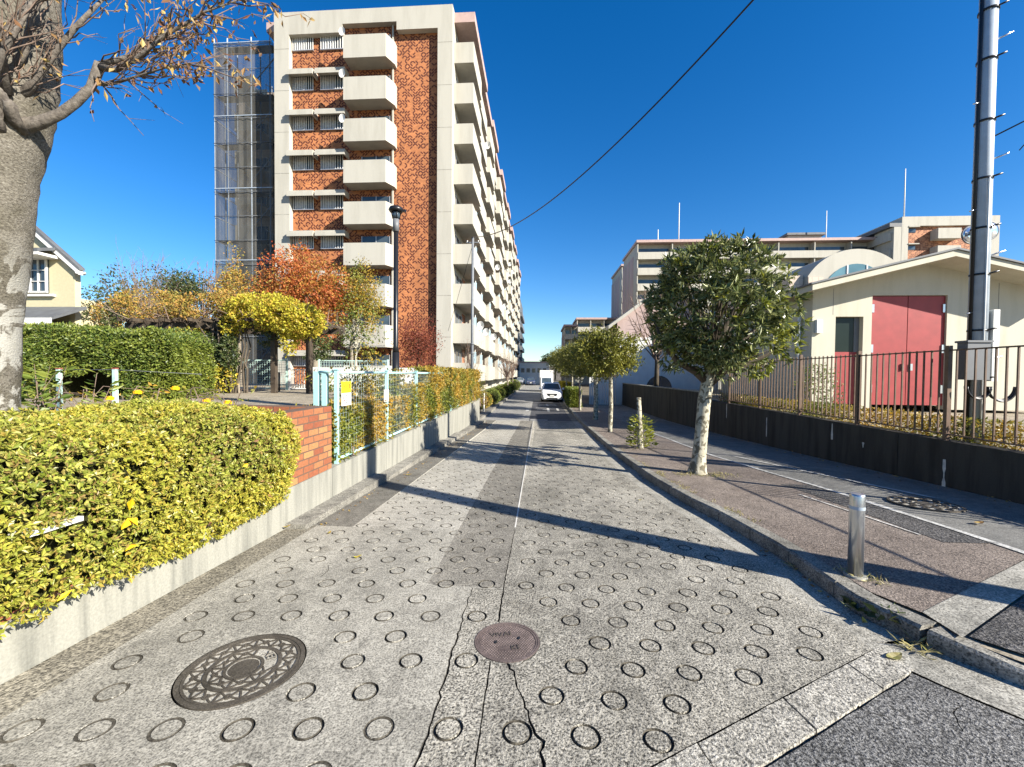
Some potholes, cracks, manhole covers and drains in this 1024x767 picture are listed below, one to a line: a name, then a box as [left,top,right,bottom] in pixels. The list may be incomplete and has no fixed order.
crack [413,589,502,767]
manhole cover [886,496,967,513]
crack [507,653,546,767]
manhole cover [172,634,306,711]
manhole cover [475,622,540,665]
